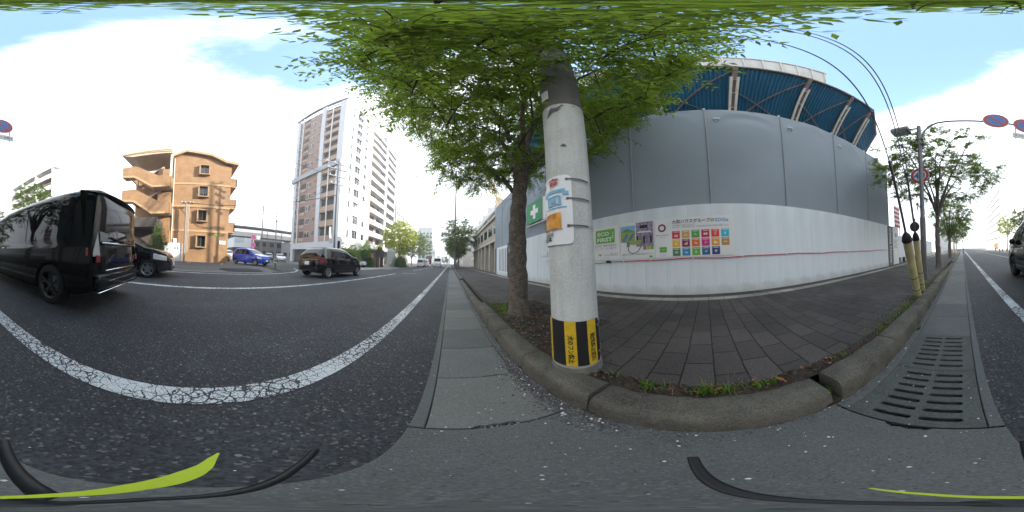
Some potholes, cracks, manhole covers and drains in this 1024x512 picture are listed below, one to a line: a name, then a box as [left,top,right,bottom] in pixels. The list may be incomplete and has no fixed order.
drain grate [898,334,975,371]
drain grate [848,365,988,429]
